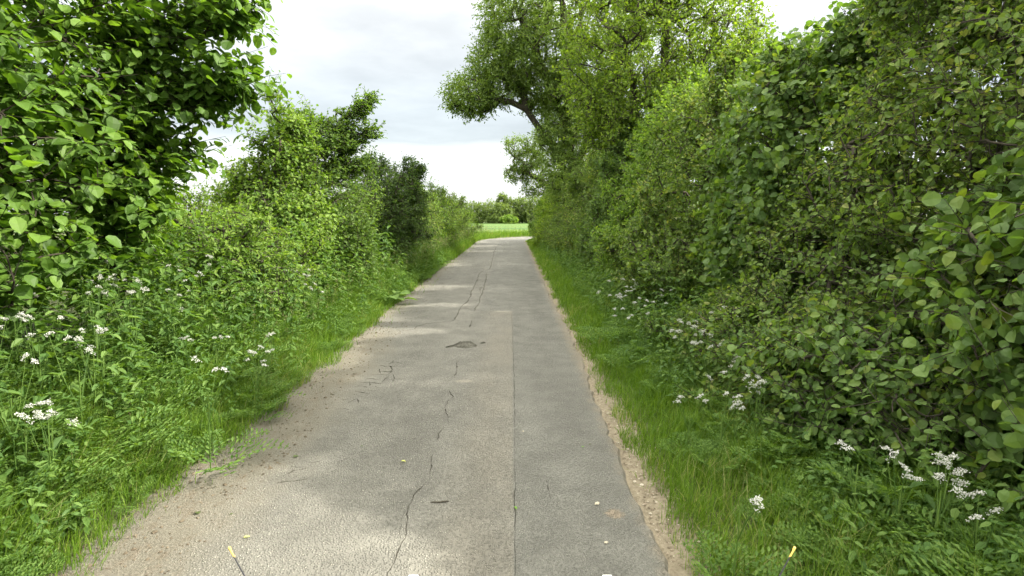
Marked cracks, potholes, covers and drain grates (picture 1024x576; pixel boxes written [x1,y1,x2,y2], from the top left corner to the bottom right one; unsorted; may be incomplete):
crack [342,361,398,410]
crack [387,363,457,575]
crack [404,248,496,331]
